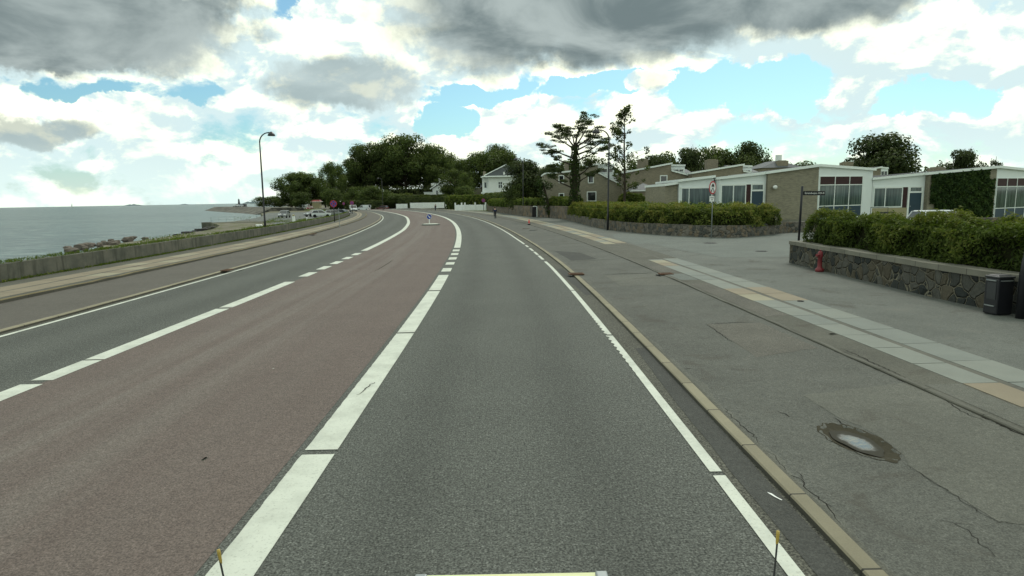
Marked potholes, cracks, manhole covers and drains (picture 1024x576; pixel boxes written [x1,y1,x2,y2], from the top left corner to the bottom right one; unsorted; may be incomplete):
crack [725,408,866,548]
crack [905,464,1000,556]
crack [947,401,1023,435]
